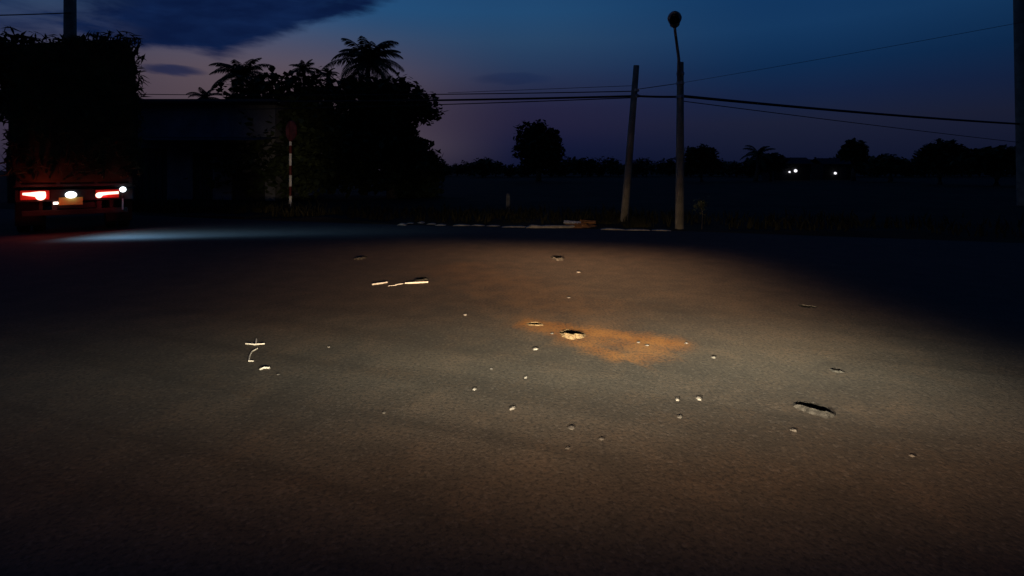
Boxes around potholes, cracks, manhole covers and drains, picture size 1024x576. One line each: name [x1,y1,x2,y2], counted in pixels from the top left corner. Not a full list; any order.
pothole [560,329,586,340]
pothole [793,401,836,419]
